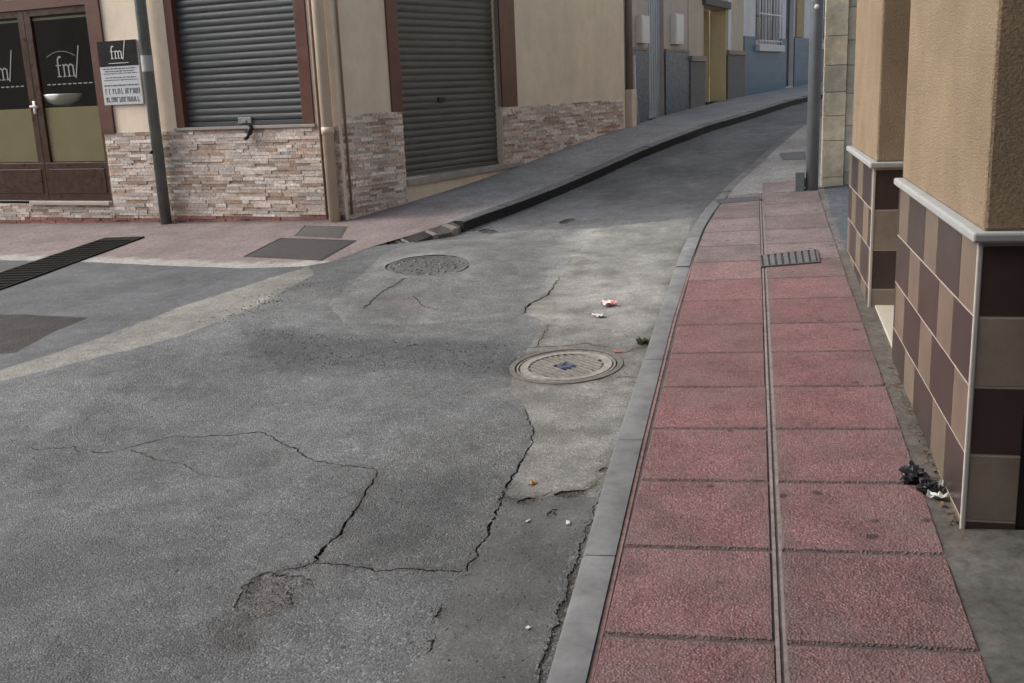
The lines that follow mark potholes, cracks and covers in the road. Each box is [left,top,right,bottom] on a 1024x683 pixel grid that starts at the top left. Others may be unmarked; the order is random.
utility cover [294,225,347,238]
manhole cover [508,348,624,384]
drain grate [0,236,145,290]
pothole [233,571,313,618]
crack [523,276,638,353]
utility cover [779,152,806,160]
manhole cover [385,255,469,276]
utility cover [243,238,357,261]
crack [27,410,599,683]
